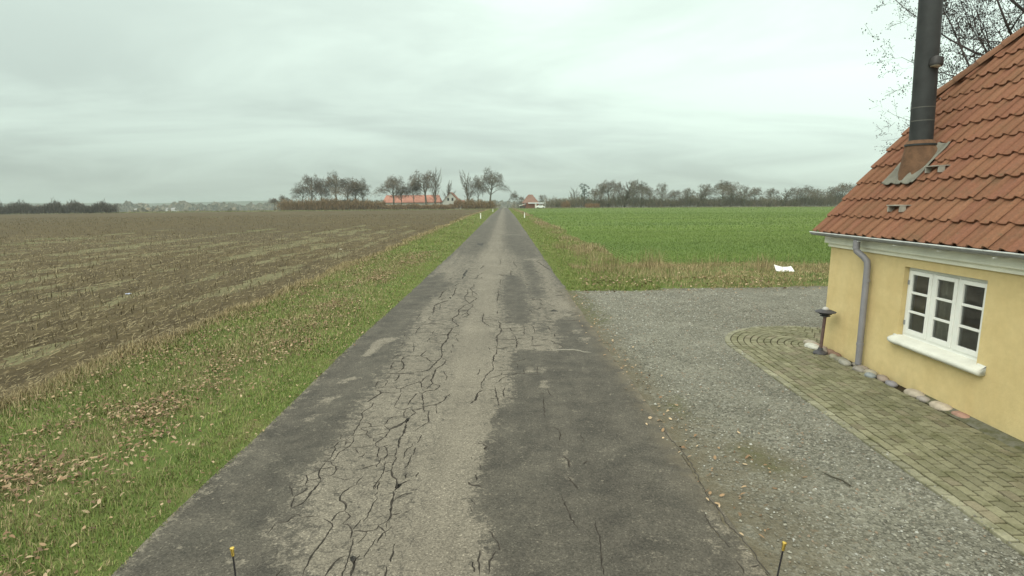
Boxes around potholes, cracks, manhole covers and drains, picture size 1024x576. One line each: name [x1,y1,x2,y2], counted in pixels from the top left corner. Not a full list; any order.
crack [268,259,605,576]
crack [665,432,770,575]
